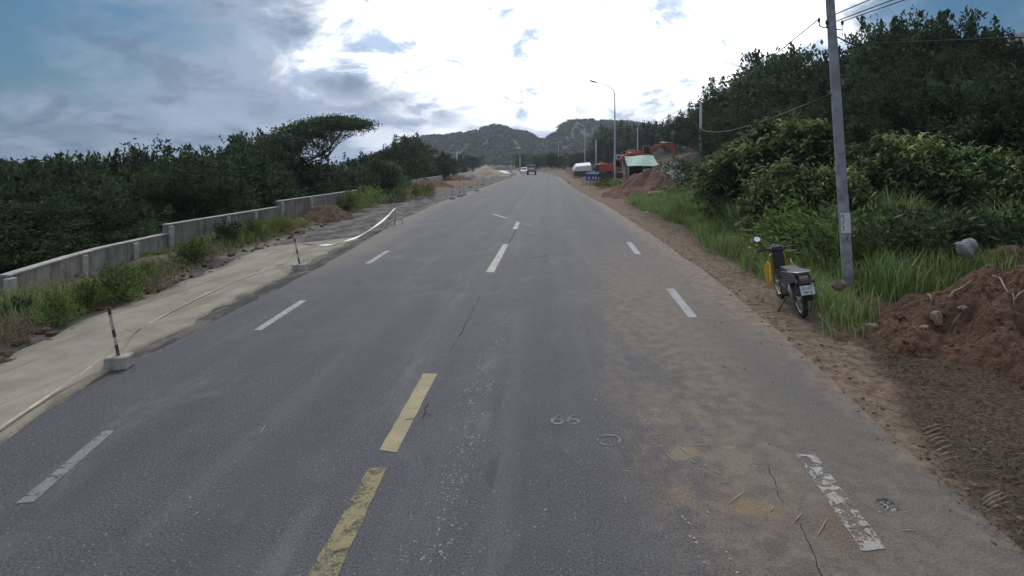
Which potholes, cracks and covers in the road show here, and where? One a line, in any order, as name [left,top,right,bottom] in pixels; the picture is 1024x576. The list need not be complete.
crack [750,464,822,576]
pothole [875,497,901,512]
